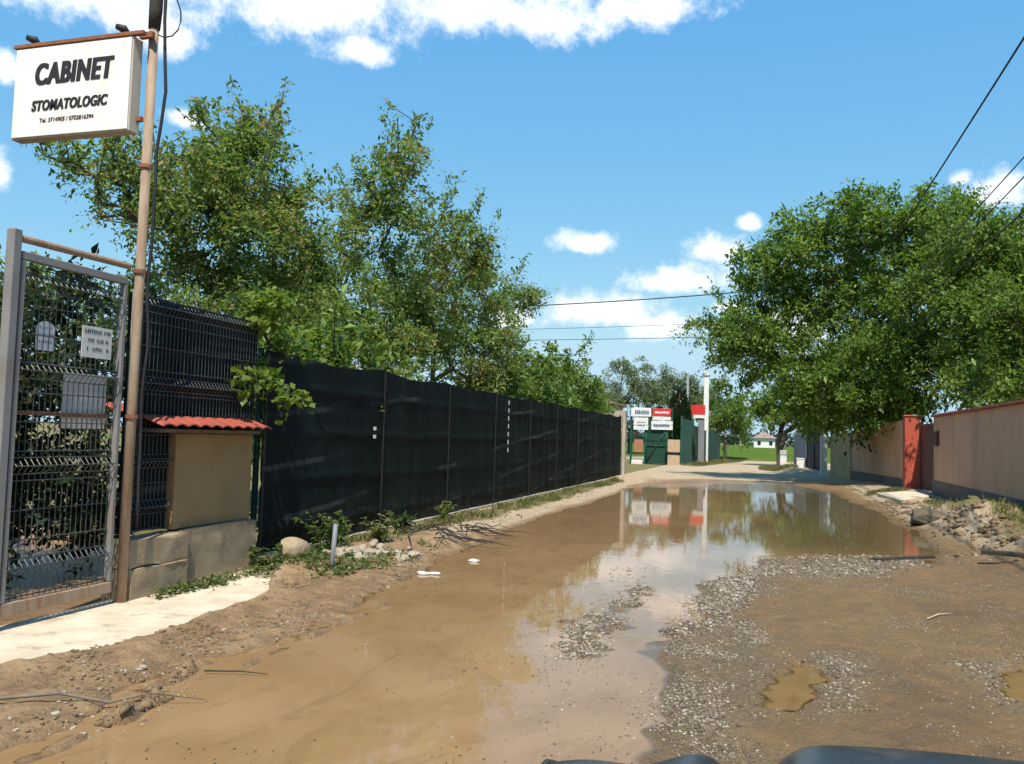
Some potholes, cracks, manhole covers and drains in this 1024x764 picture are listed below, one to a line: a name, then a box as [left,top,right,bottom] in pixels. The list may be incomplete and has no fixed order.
pothole [0,478,956,764]
pothole [986,661,1024,703]
